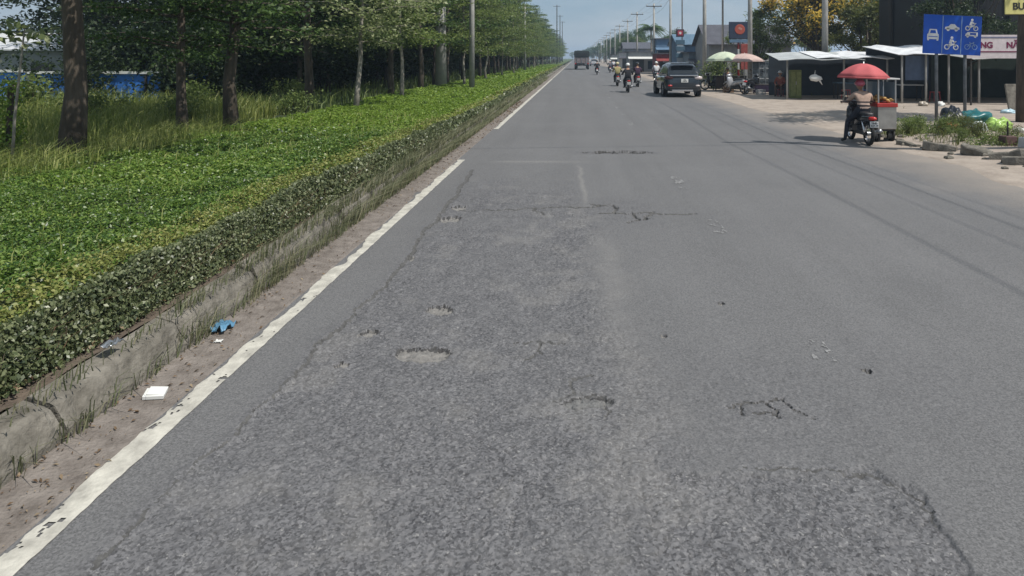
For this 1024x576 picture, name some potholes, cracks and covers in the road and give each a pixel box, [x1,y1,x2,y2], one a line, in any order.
pothole [395,346,452,364]
pothole [426,304,453,316]
crack [90,169,697,571]
crack [728,397,816,420]
